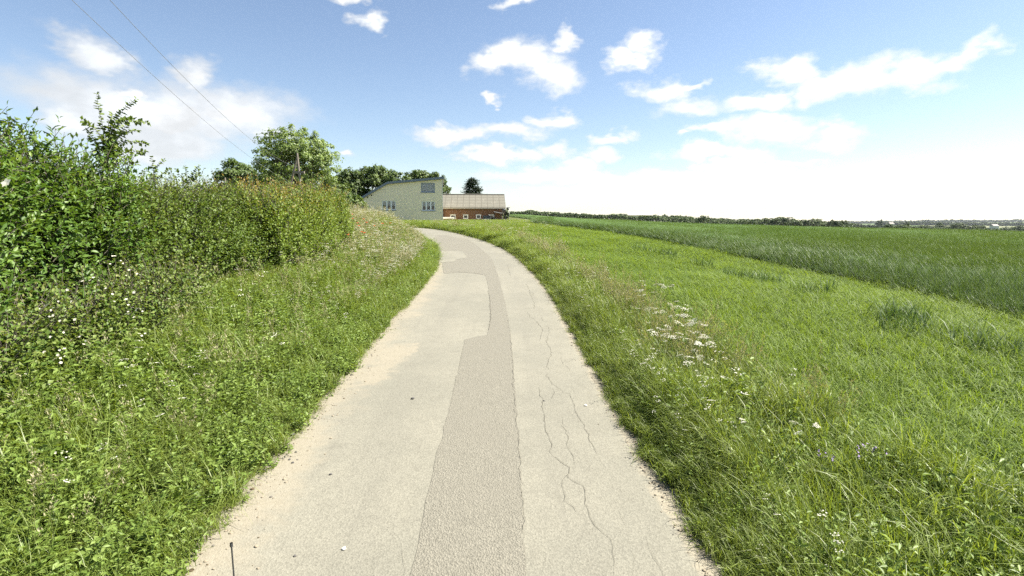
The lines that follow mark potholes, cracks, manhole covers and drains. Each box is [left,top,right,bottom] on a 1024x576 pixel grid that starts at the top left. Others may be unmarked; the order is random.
crack [527,285,622,566]
